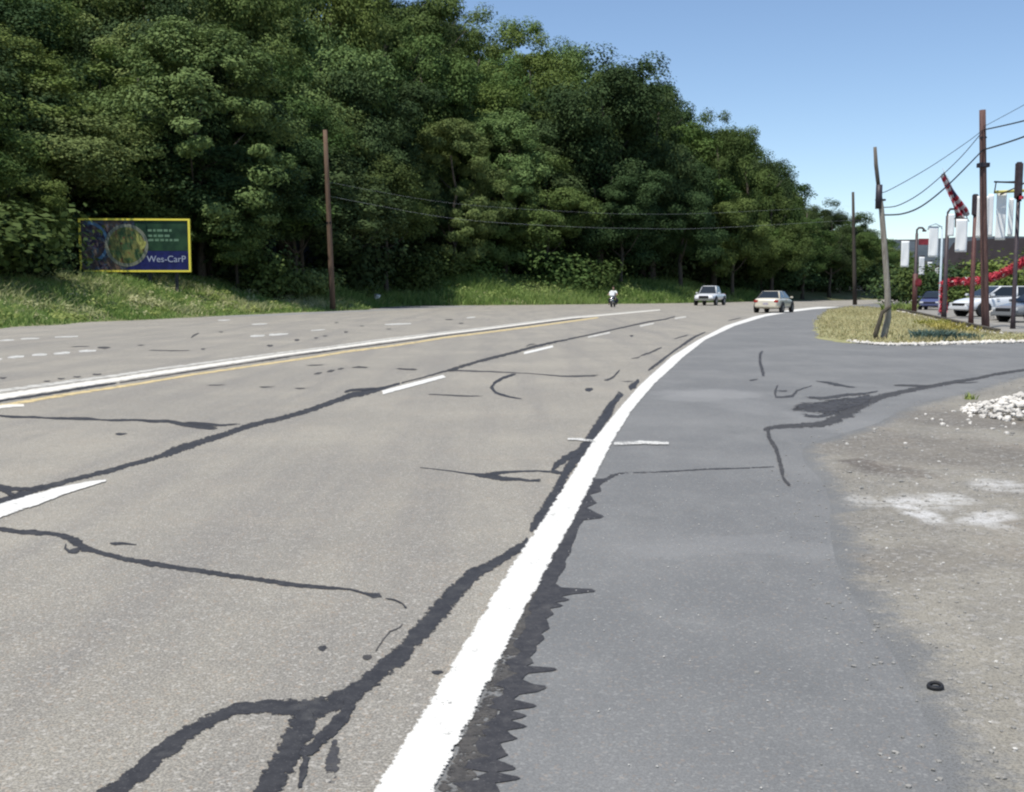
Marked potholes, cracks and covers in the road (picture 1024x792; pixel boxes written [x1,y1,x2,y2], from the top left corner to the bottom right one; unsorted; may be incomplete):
crack [362,624,402,660]
crack [210,364,416,389]
crack [137,319,463,351]
